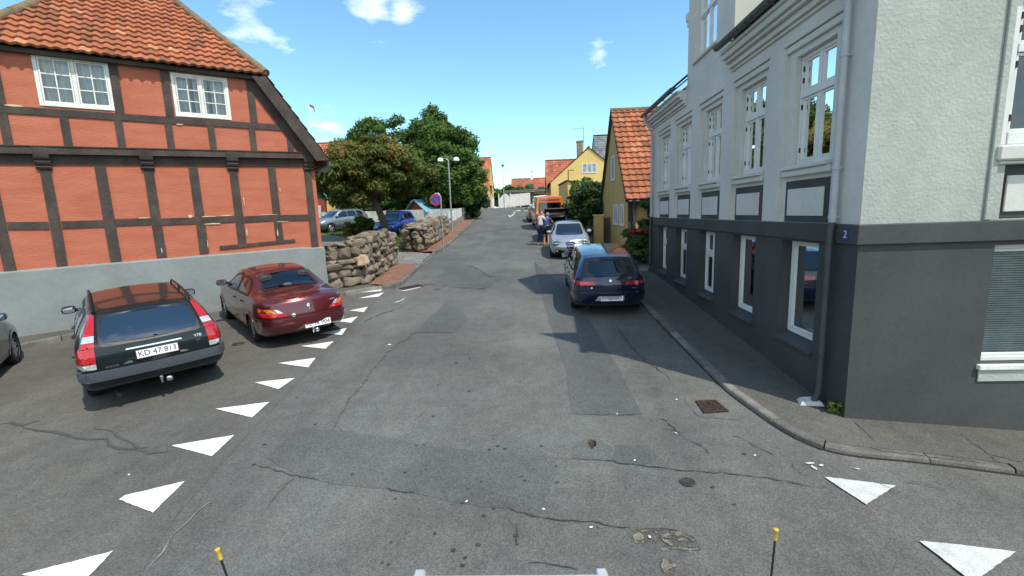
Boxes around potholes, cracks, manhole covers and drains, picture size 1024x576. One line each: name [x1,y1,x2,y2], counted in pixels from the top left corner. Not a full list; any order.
crack [3,421,170,454]
pothole [630,528,700,553]
crack [658,398,774,455]
pothole [659,557,676,576]
manhole cover [680,477,696,487]
crack [566,458,824,488]
